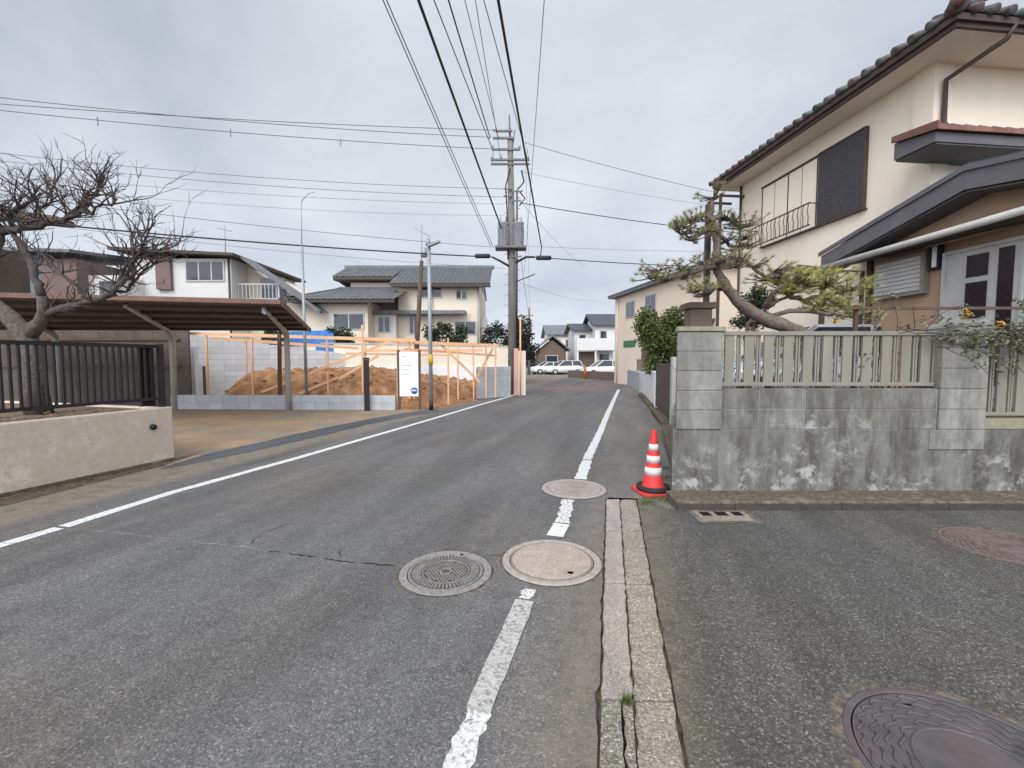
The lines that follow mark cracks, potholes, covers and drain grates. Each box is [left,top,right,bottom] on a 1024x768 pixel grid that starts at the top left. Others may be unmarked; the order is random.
manhole cover [396,550,494,597]
manhole cover [500,539,604,587]
drain grate [686,510,765,523]
manhole cover [931,525,1024,565]
manhole cover [828,680,1024,768]
manhole cover [540,479,608,499]
crack [74,523,395,566]
